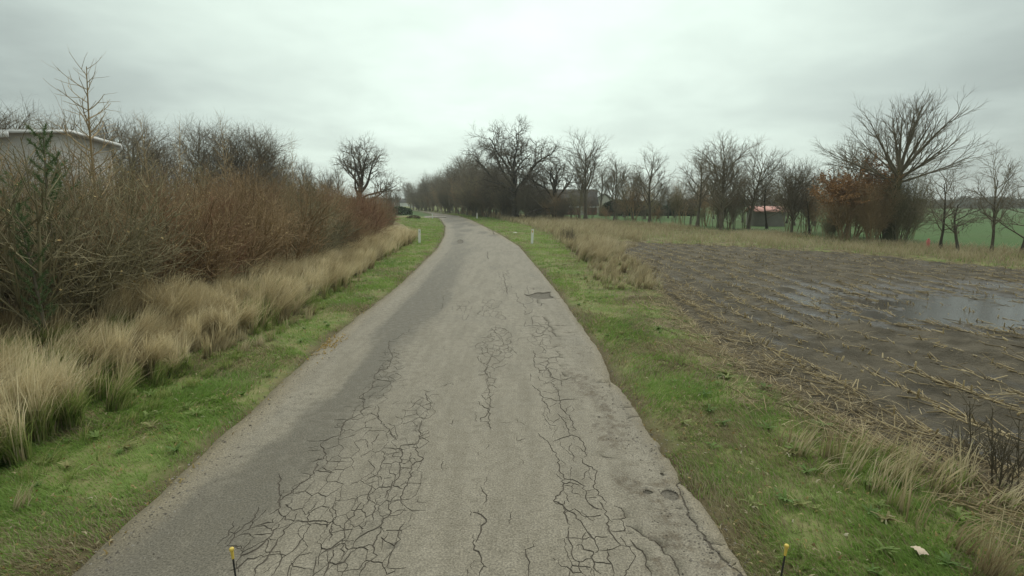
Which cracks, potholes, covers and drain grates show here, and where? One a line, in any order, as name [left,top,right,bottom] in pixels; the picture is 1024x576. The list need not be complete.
crack [441,232,542,441]
crack [467,479,487,576]
crack [217,331,443,576]
pothole [660,490,678,501]
crack [676,482,742,575]
crack [524,316,680,576]
